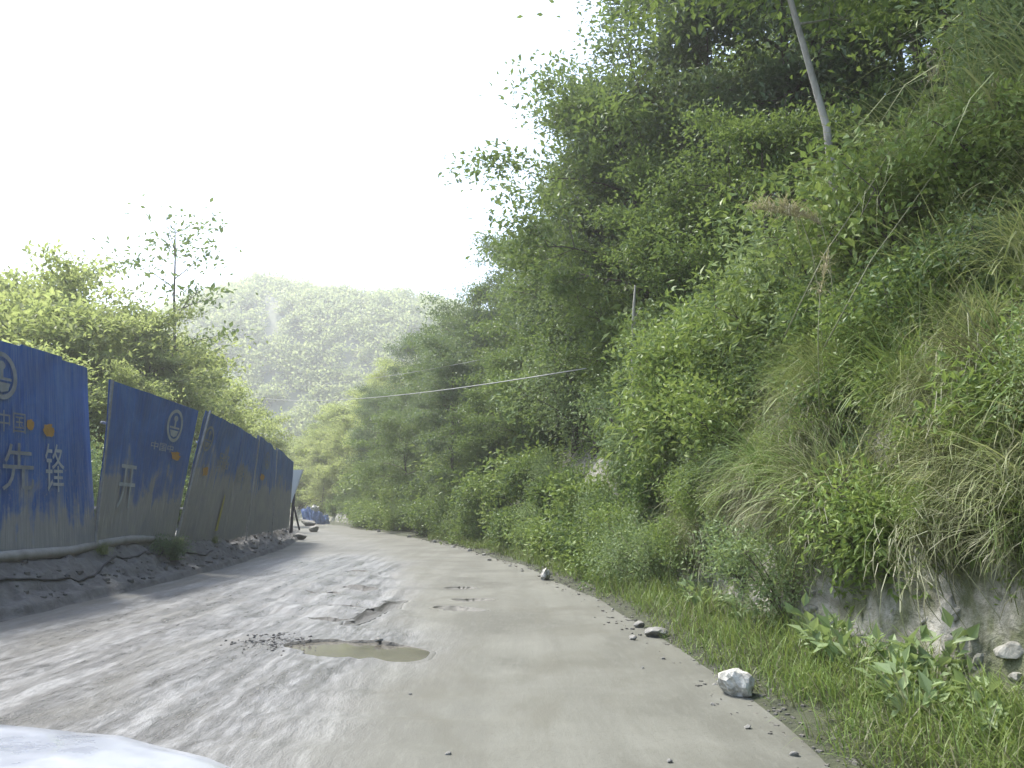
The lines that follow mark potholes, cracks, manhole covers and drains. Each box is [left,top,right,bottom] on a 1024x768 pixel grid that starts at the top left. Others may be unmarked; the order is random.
pothole [278,638,436,664]
pothole [342,600,408,626]
